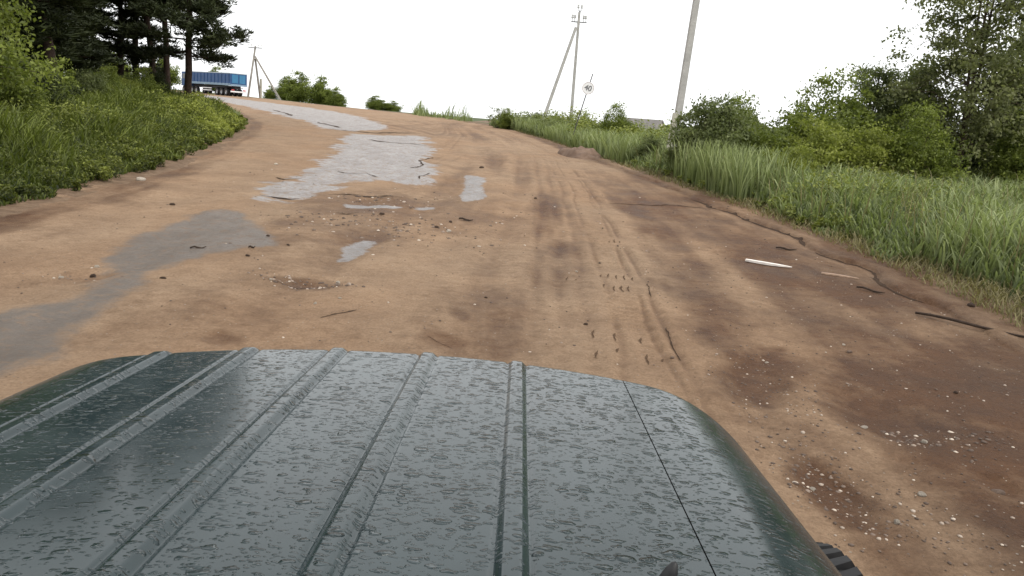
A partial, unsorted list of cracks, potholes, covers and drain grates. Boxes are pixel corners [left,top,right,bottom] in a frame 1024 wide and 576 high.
crack [610,199,923,303]
pothole [272,277,336,290]
crack [318,122,433,178]
